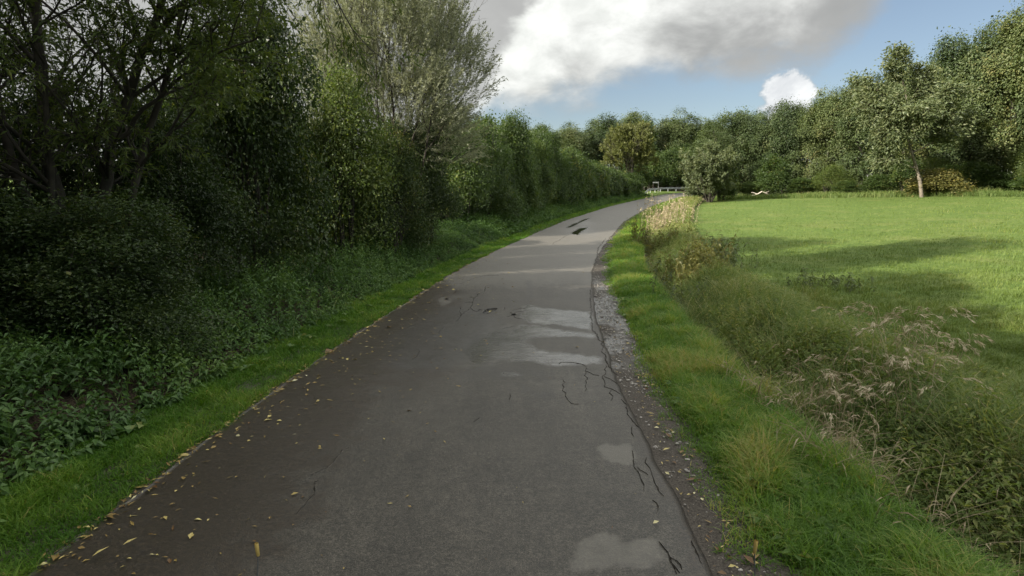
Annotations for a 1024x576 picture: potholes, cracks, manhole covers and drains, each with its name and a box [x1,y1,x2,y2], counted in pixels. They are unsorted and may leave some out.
crack [559,239,664,511]
crack [413,275,497,359]
crack [296,448,348,514]
crack [659,541,702,574]
